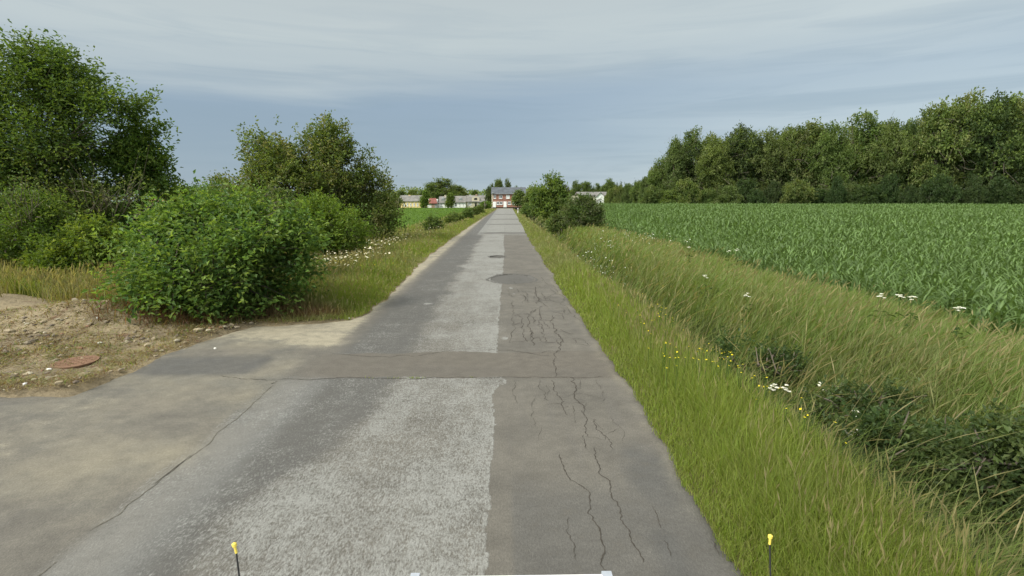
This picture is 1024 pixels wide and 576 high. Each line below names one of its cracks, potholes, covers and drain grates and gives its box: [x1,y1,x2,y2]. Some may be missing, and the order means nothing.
manhole cover [50,355,100,369]
crack [509,277,672,571]
